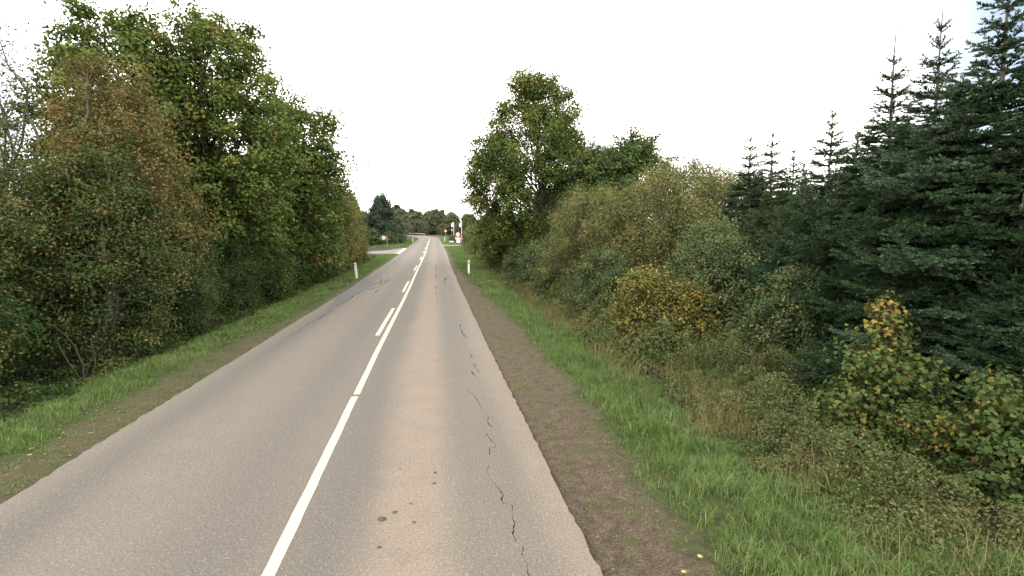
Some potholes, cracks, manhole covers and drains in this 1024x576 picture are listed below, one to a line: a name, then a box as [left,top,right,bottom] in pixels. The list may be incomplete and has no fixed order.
crack [471,393,530,576]
